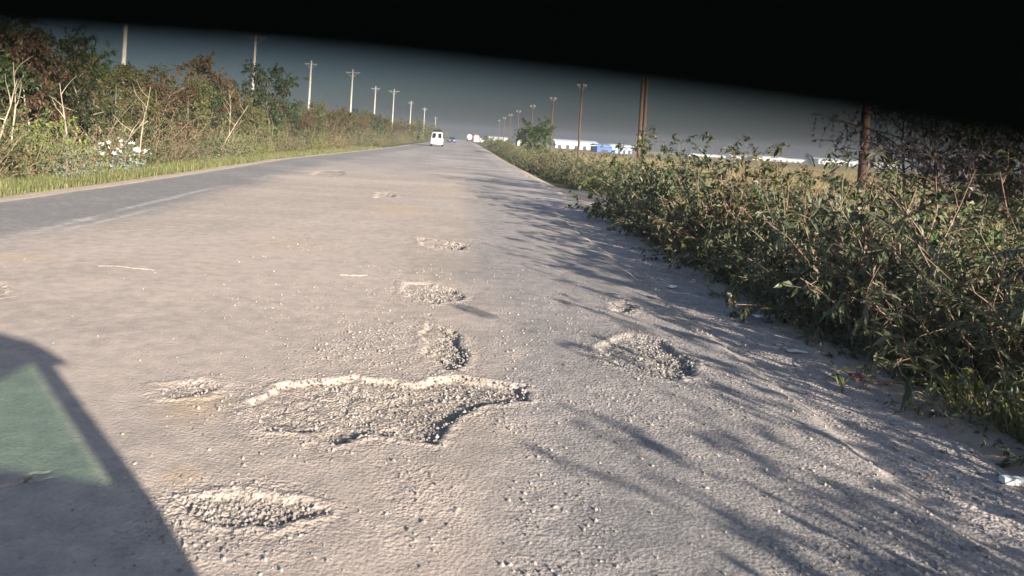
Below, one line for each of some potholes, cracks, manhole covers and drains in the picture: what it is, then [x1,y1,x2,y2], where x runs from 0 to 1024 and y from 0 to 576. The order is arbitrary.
pothole [401,315,489,373]
pothole [135,370,247,407]
pothole [400,234,485,254]
pothole [592,296,658,319]
pothole [297,169,361,178]
pothole [382,278,479,309]
pothole [216,369,548,460]
pothole [149,475,352,543]
pothole [574,328,722,389]
pothole [359,191,410,200]
